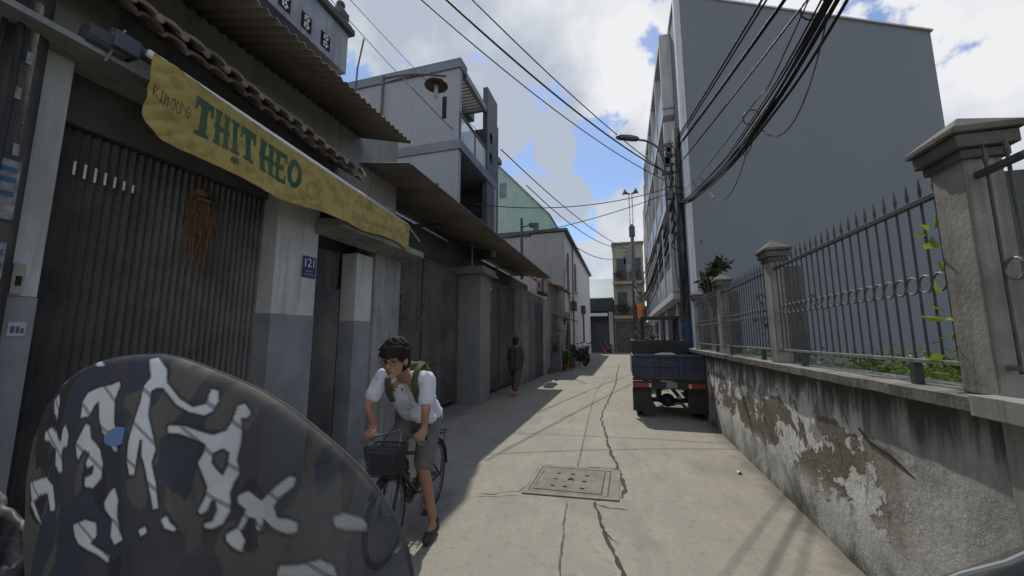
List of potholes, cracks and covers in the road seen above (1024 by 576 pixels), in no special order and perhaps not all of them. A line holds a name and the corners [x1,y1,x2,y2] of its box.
crack [558,501,568,576]
manhole cover [522,464,620,502]
crack [572,364,628,576]
